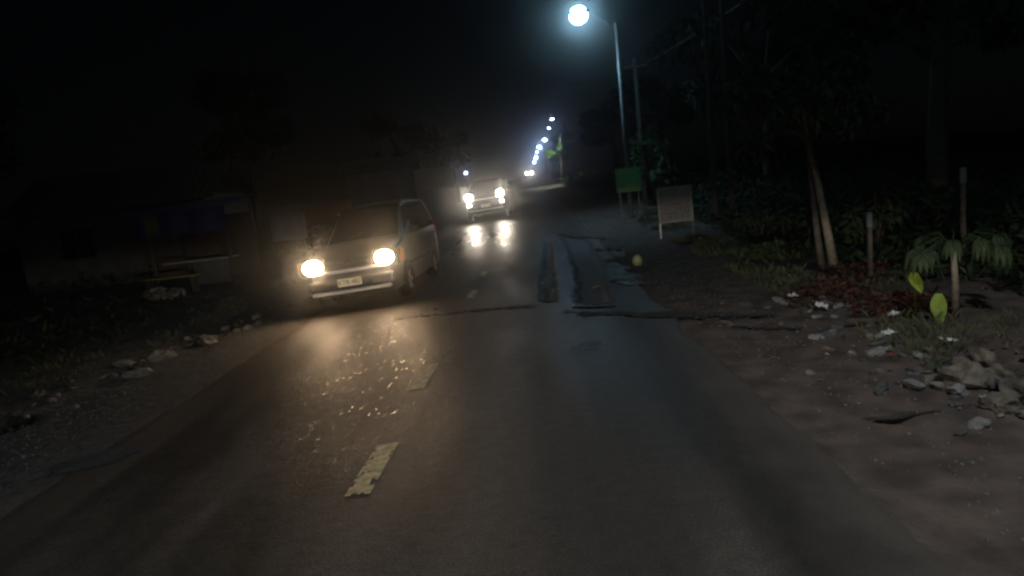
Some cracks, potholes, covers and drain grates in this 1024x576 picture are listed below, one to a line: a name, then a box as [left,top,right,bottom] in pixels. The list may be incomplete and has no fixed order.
crack [862,410,942,420]
pothole [538,242,559,303]
crack [393,306,536,320]
